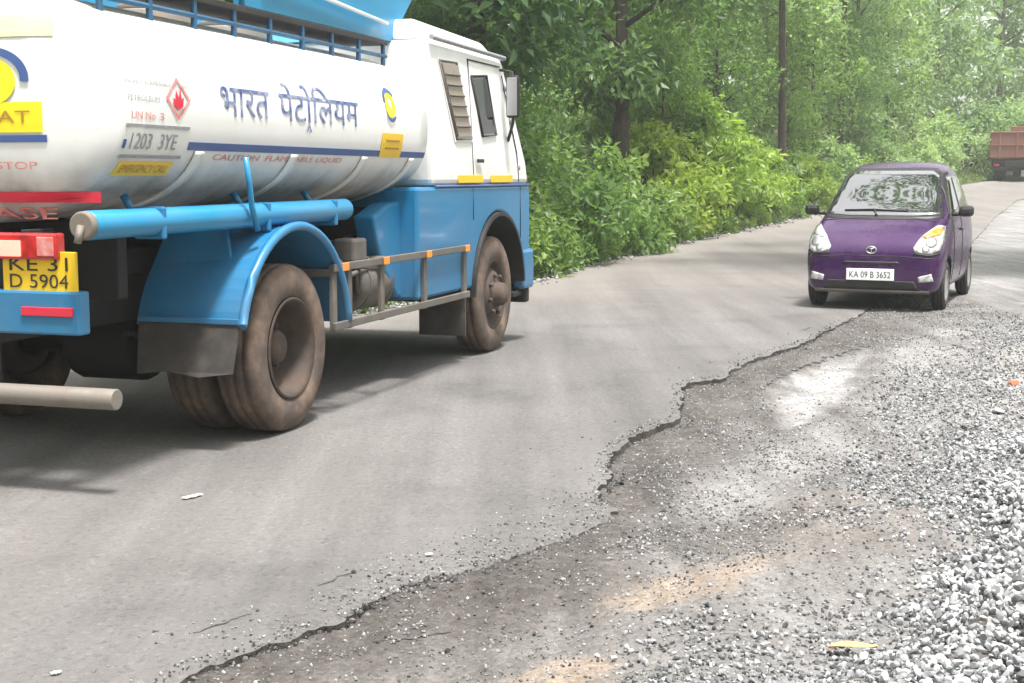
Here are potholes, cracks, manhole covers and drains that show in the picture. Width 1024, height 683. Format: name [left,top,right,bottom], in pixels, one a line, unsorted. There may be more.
pothole [582,488,655,546]
pothole [193,599,402,683]
pothole [731,321,856,376]
pothole [764,349,877,432]
pothole [680,379,749,425]
crack [193,614,251,633]
pothole [607,424,697,487]
